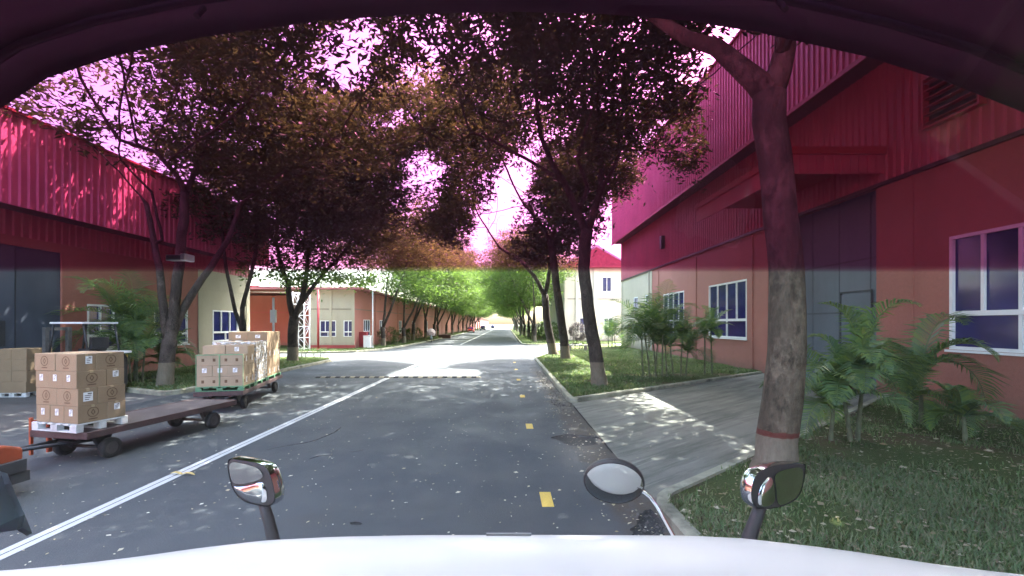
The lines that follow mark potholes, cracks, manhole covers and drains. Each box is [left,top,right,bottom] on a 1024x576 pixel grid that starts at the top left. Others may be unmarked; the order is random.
pothole [630,509,665,535]
